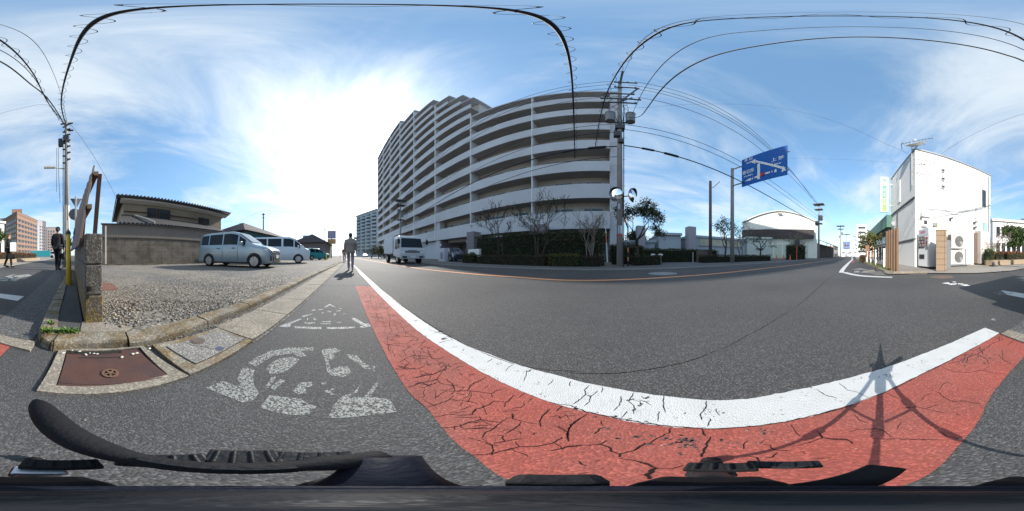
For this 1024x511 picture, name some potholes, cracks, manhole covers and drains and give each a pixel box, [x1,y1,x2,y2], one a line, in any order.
crack [360,274,1014,479]
manhole cover [37,346,189,396]
manhole cover [152,328,253,376]
